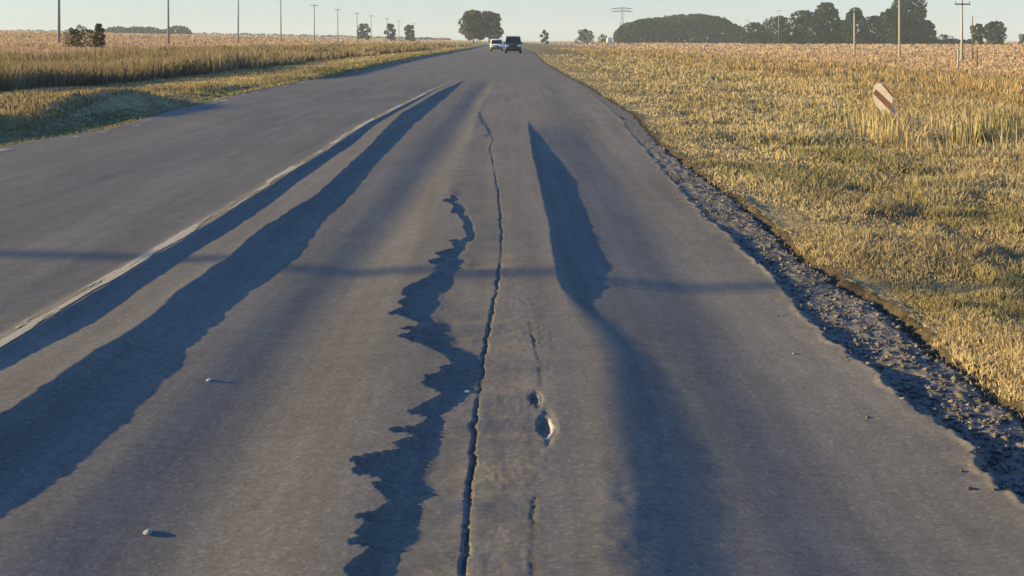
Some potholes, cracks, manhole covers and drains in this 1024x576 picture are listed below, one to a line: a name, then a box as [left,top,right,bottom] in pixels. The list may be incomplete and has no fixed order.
crack [529,322,545,391]
pothole [535,413,556,441]
crack [462,113,505,576]
crack [528,496,540,576]
pothole [529,392,541,406]
